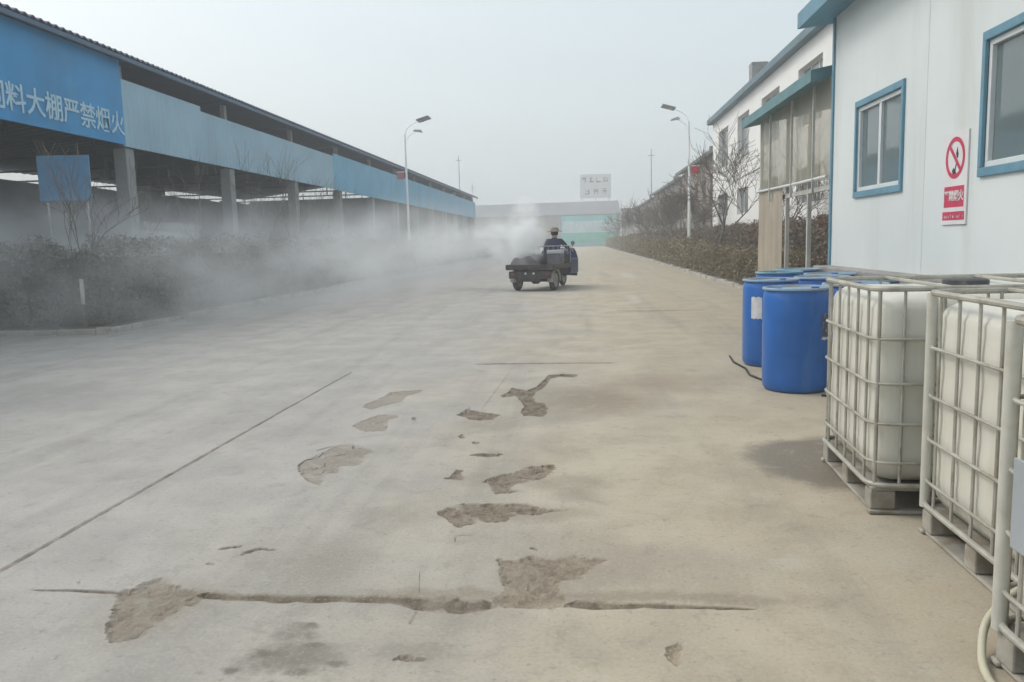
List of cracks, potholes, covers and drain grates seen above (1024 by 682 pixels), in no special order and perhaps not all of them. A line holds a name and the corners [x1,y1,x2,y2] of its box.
crack [408,570,421,625]
pothole [104,577,203,643]
pothole [389,654,430,662]
pothole [500,374,578,417]
pothole [436,503,568,528]
pothole [482,464,557,495]
pothole [442,469,464,481]
pothole [490,554,609,610]
pothole [456,407,501,421]
pothole [352,390,423,432]
pothole [664,642,686,667]
